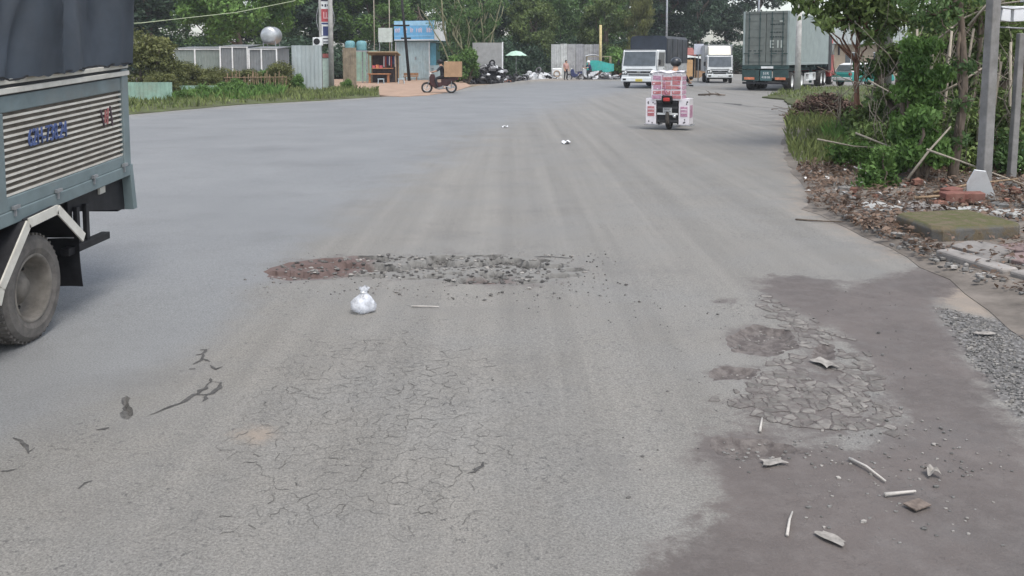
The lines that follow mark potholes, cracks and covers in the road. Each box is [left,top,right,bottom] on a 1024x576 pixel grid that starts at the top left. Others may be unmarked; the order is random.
crack [149,349,223,415]
crack [708,294,904,437]
crack [216,331,520,541]
pothole [725,324,799,357]
pothole [264,253,591,286]
